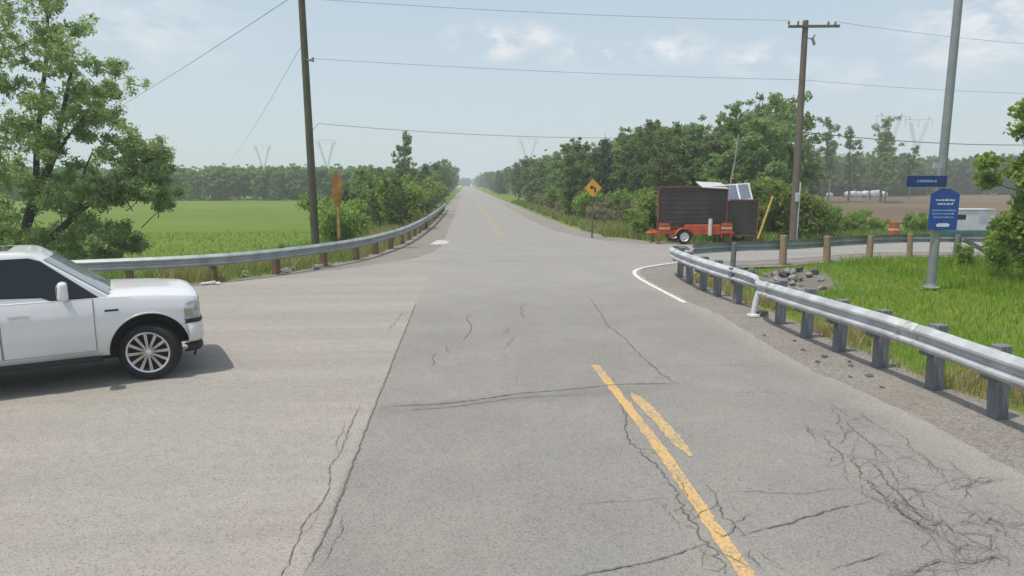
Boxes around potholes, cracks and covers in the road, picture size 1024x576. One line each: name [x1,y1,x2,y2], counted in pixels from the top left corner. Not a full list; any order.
crack [397,303,781,410]
crack [281,407,360,575]
crack [591,404,1024,576]
